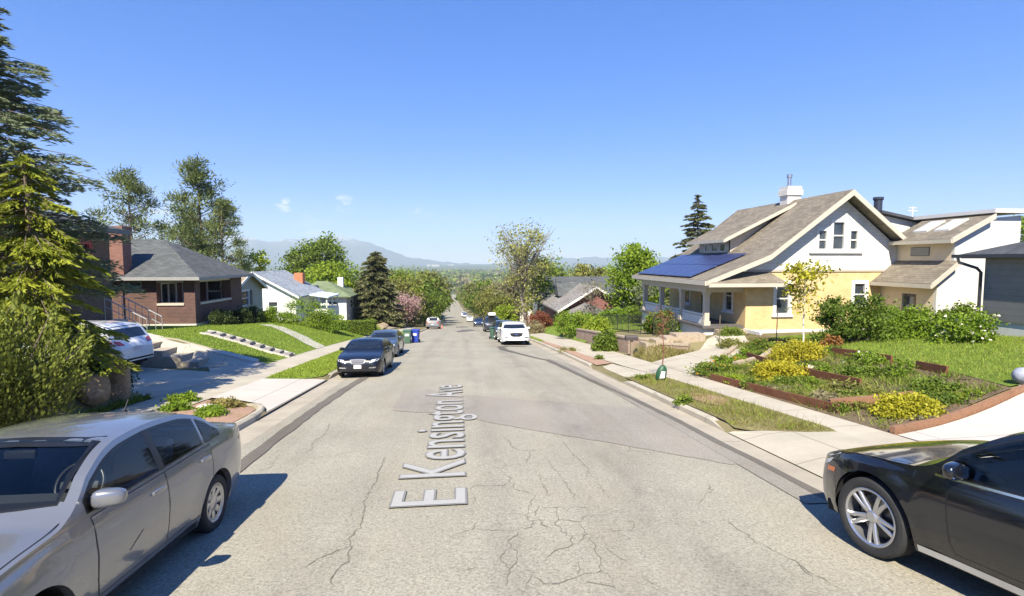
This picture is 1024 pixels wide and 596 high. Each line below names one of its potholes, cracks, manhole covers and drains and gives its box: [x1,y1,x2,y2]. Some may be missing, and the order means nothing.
crack [302,459,384,587]
crack [728,521,834,586]
crack [453,437,658,591]
